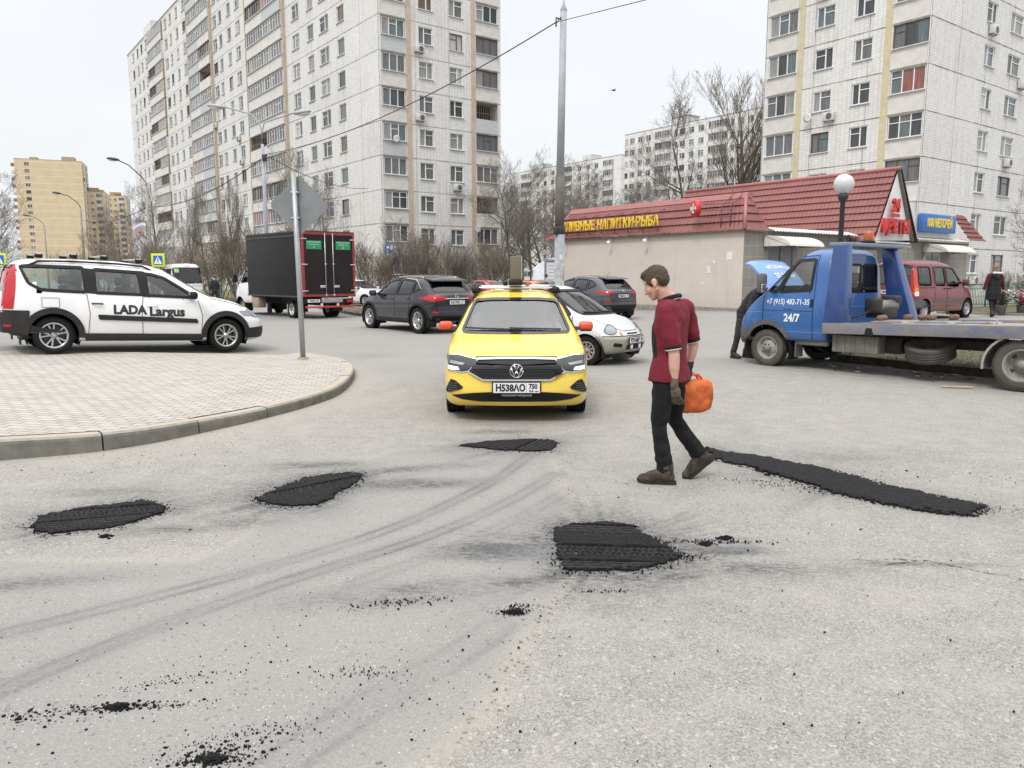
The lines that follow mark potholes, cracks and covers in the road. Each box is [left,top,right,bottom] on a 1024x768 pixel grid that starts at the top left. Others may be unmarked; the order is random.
crack [855,558,1024,580]
